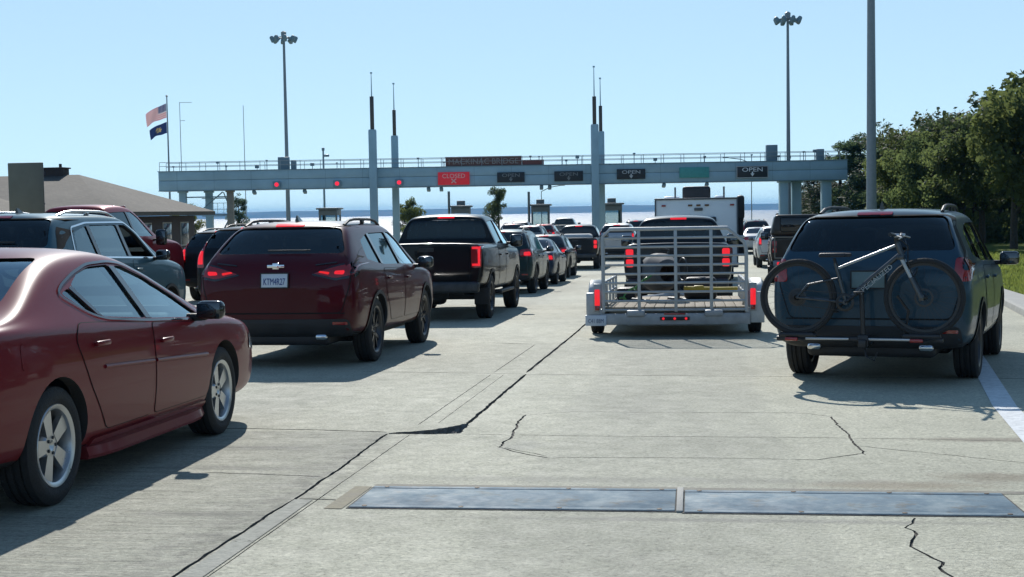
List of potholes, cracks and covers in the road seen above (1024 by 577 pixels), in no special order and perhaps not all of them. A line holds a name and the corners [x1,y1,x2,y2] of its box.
crack [904,518,954,577]
crack [466,324,1024,463]
